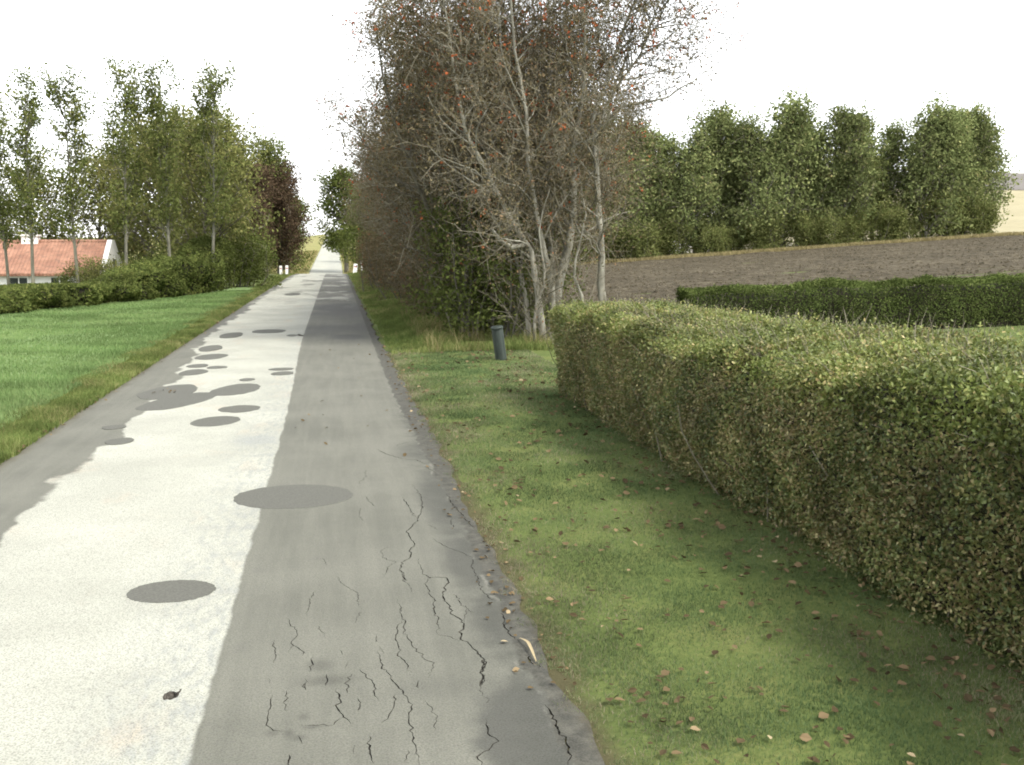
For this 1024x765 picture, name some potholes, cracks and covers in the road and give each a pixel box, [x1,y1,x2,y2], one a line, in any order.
crack [266,592,438,764]
crack [378,449,539,765]
crack [545,705,572,763]
